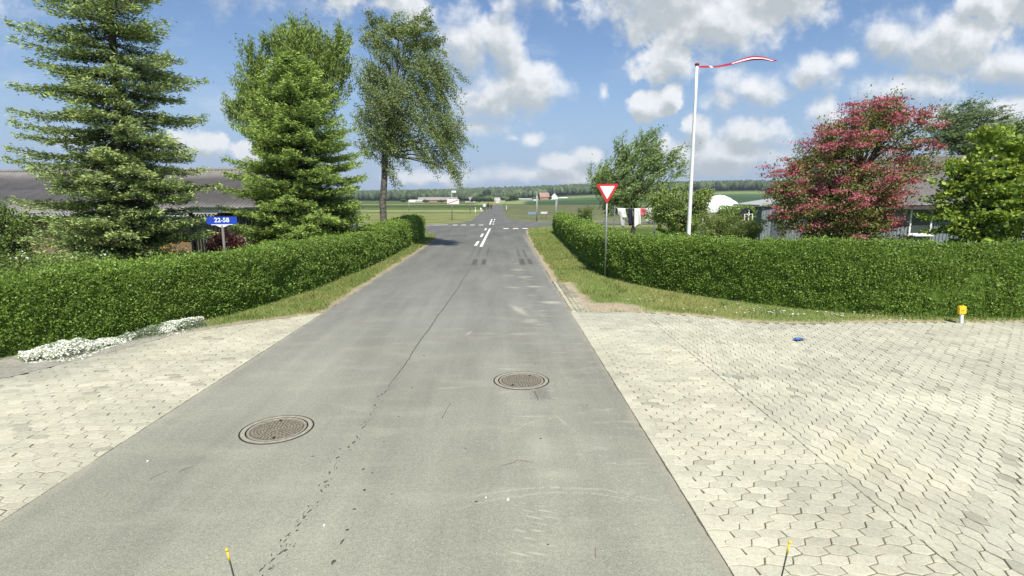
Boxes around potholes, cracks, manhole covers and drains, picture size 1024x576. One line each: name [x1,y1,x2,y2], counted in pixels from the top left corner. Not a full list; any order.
crack [259,267,471,576]
manhole cover [493,372,549,390]
manhole cover [238,415,314,445]
